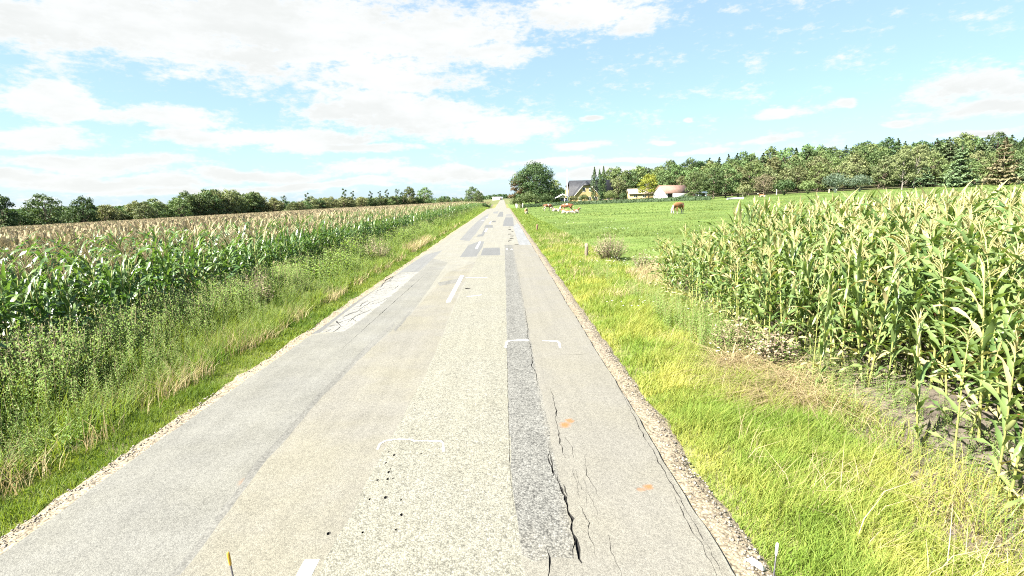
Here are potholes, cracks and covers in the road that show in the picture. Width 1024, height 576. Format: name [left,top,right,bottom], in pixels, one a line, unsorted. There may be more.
crack [326,274,405,332]
crack [525,311,622,576]
crack [619,389,720,575]
